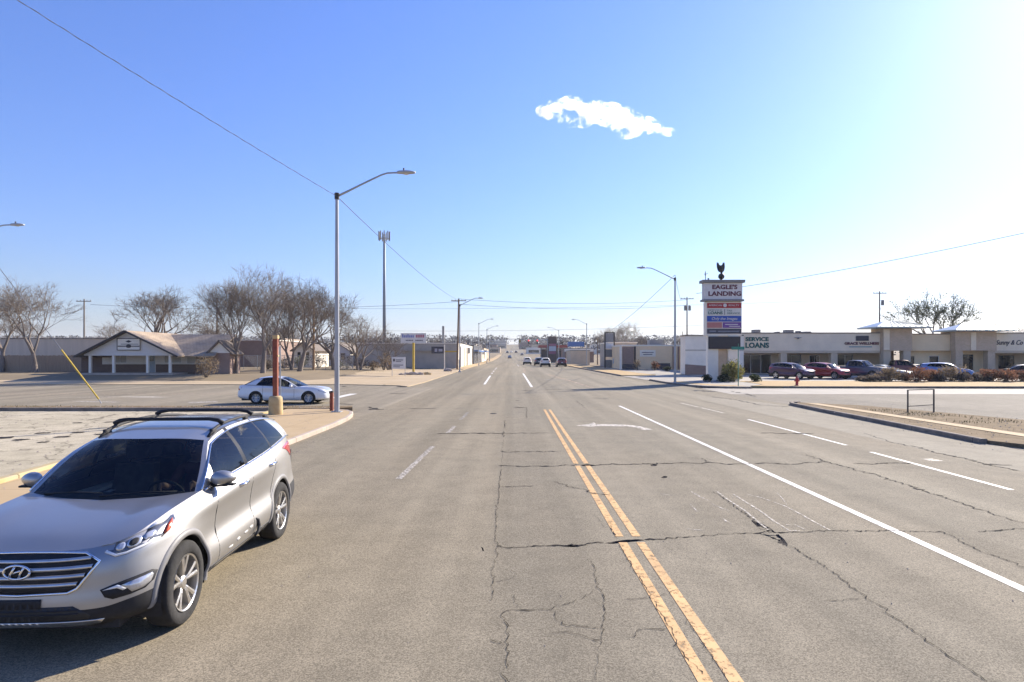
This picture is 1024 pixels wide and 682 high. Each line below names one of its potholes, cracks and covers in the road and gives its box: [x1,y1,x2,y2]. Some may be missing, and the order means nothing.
pothole [752,521,788,545]
crack [437,390,725,682]
crack [786,528,1024,680]
